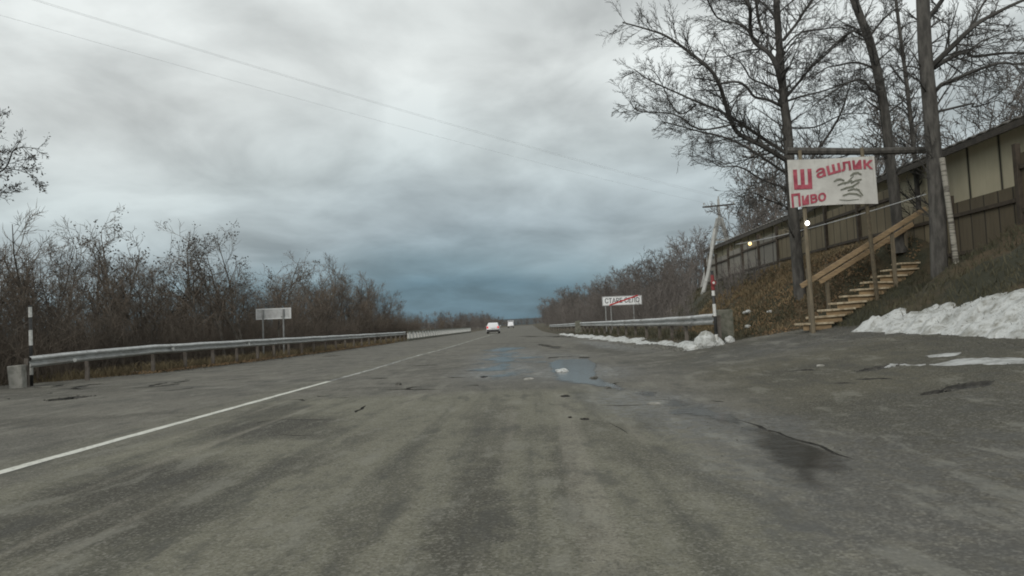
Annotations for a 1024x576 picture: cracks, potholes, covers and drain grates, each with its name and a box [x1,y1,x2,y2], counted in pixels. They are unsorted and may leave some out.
pothole [853,362,907,373]
pothole [939,379,995,392]
